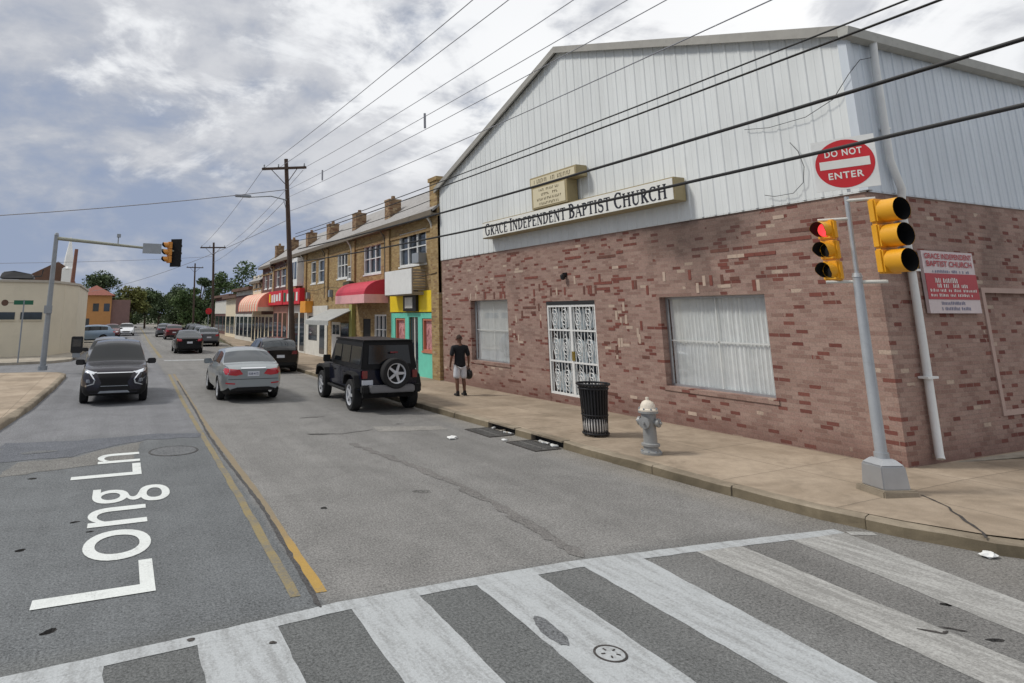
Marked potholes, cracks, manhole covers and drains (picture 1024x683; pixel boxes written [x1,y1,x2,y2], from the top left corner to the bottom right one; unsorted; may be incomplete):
manhole cover [148,446,198,456]
drain grate [506,432,570,452]
crack [922,495,988,538]
drain grate [465,420,522,438]
utility cover [593,644,628,663]
